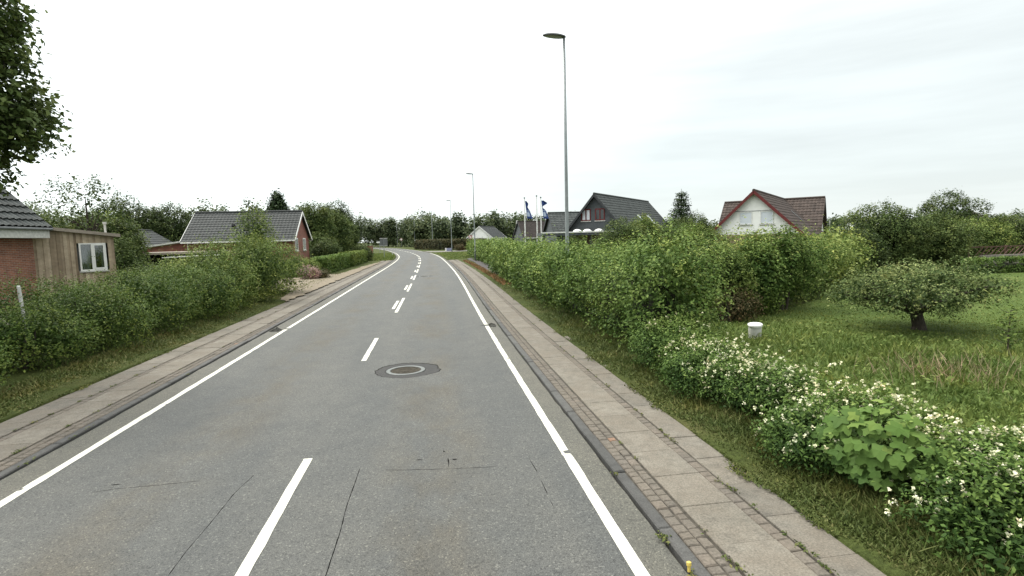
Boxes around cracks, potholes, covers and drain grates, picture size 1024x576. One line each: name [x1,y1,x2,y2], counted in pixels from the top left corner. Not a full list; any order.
crack [168,476,253,576]
manhole cover [386,365,425,375]
crack [325,469,360,576]
